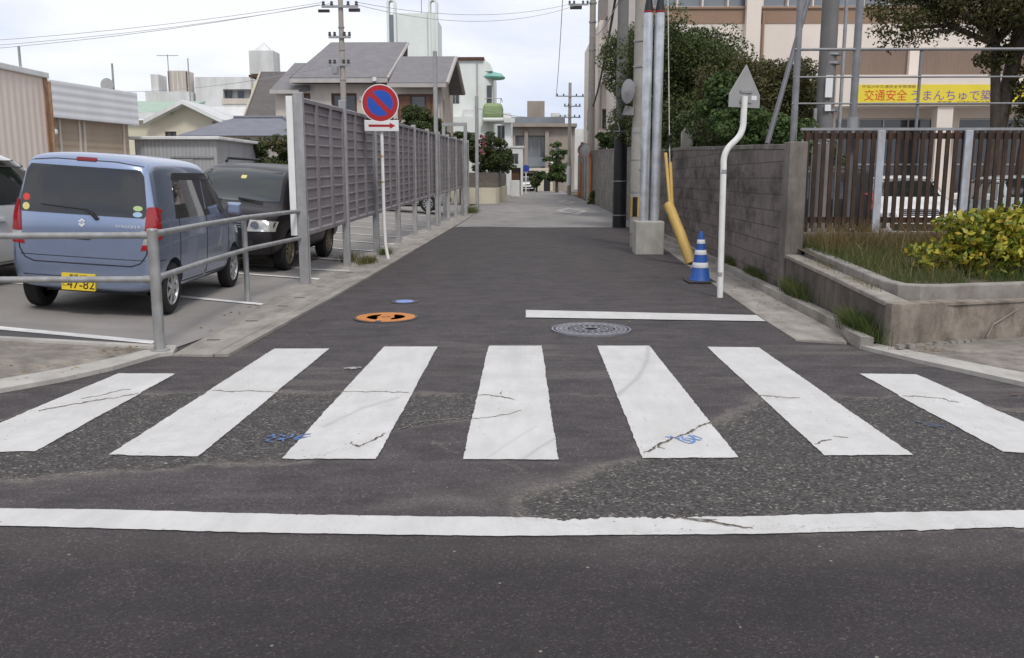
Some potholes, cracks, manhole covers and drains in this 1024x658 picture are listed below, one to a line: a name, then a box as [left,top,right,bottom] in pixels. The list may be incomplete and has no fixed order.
manhole cover [354,312,418,323]
crack [643,421,715,453]
crack [668,516,753,529]
crack [350,392,521,447]
crack [38,389,138,411]
manhole cover [551,322,631,337]
